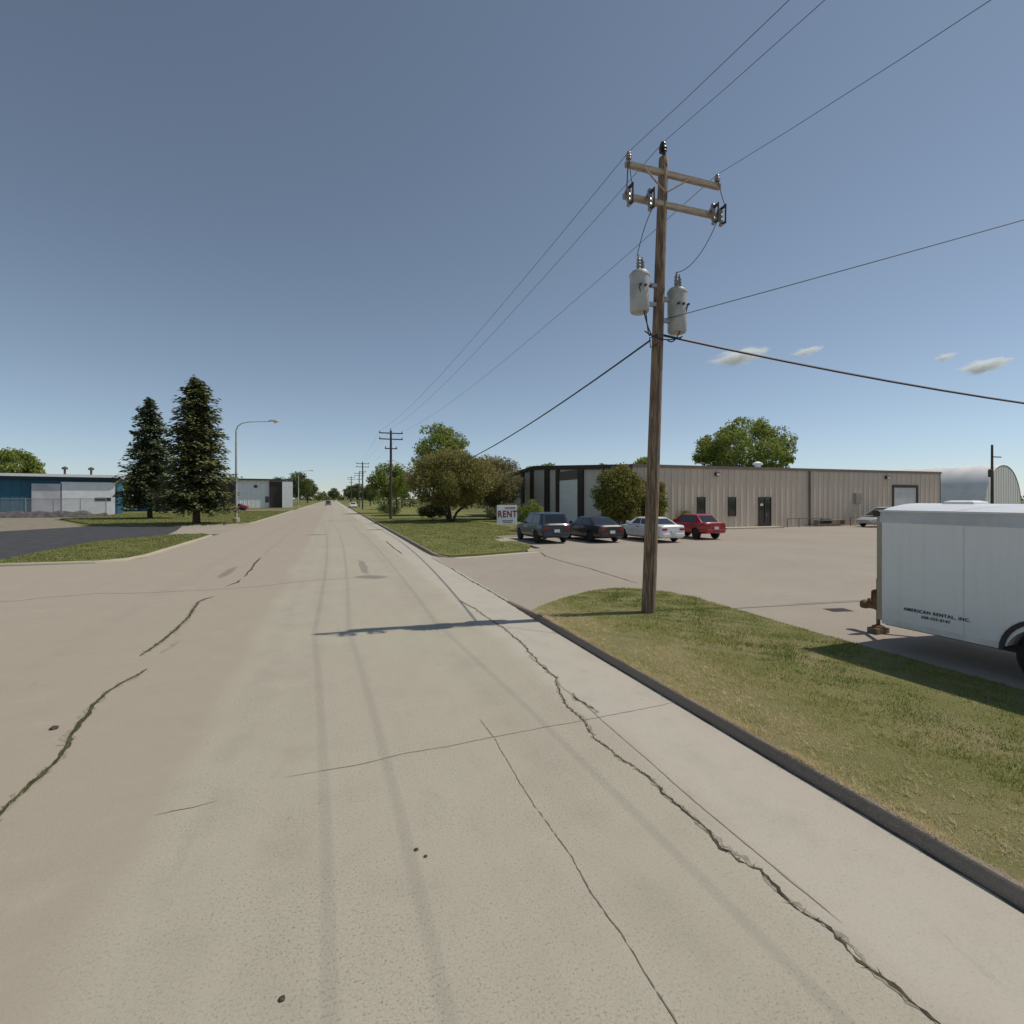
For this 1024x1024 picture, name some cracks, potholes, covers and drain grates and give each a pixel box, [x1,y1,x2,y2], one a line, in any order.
crack [288,600,941,1024]
crack [0,525,346,821]
